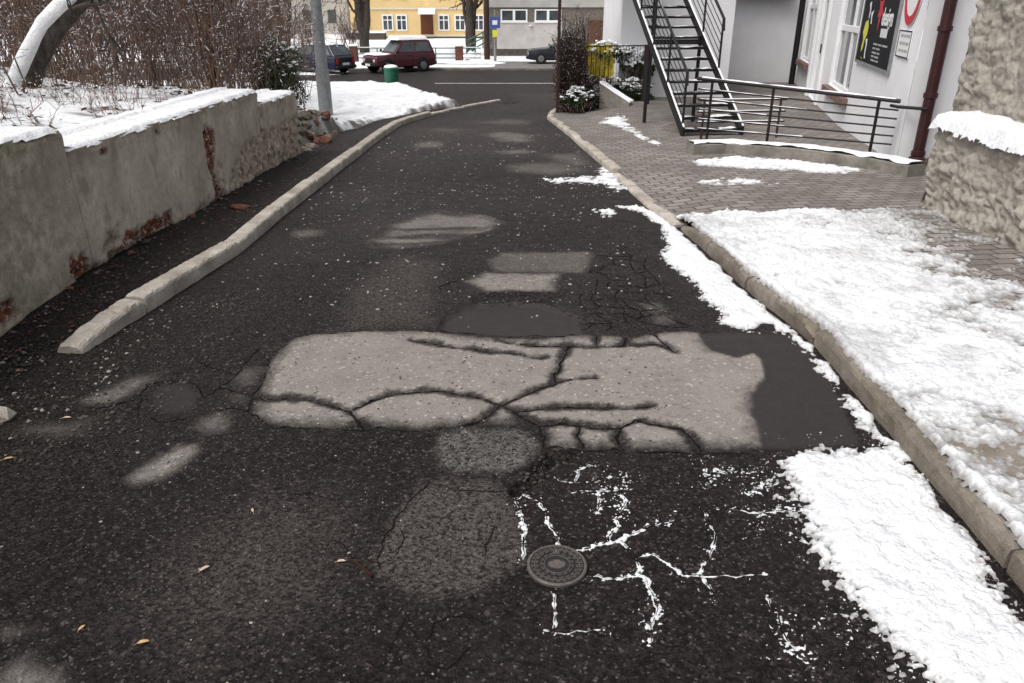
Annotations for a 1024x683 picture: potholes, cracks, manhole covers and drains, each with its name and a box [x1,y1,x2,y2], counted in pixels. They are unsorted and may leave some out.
manhole cover [527,545,587,588]
crack [80,247,992,683]
